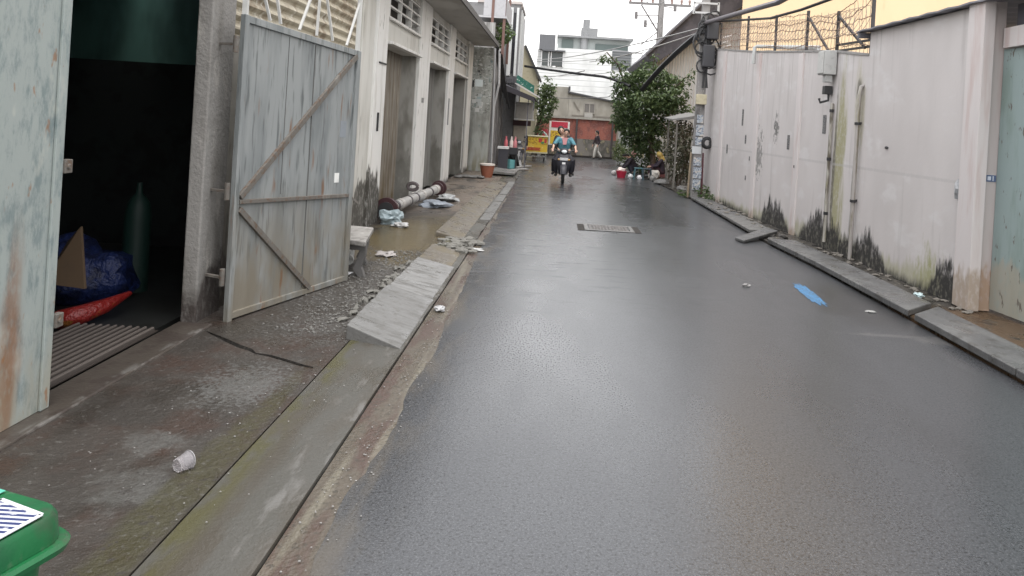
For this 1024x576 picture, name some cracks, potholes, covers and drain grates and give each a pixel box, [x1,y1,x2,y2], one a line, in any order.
crack [210,333,313,368]
